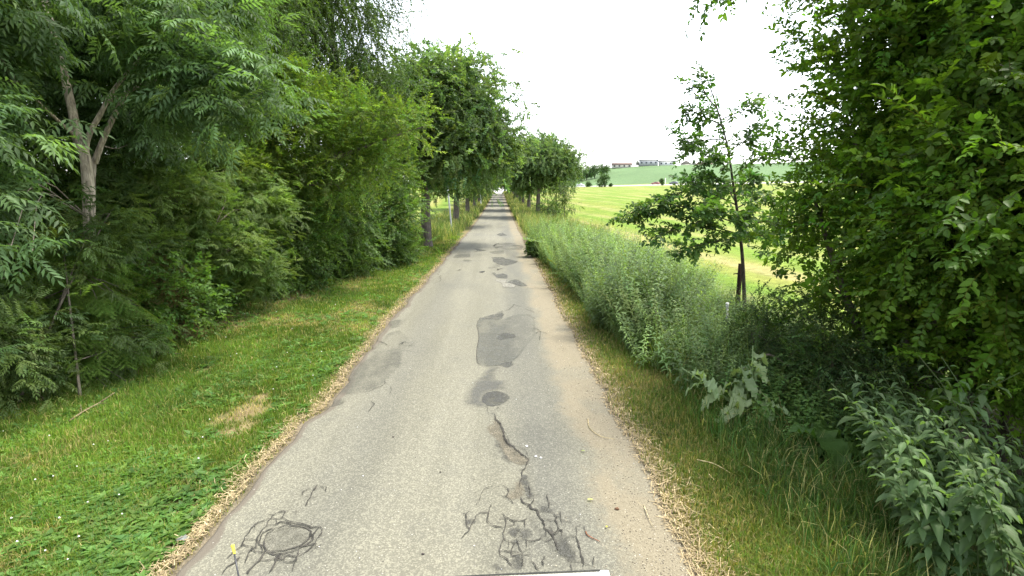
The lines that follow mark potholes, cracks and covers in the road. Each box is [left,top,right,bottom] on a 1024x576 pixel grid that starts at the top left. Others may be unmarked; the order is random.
crack [222,484,327,574]
crack [461,407,594,569]
